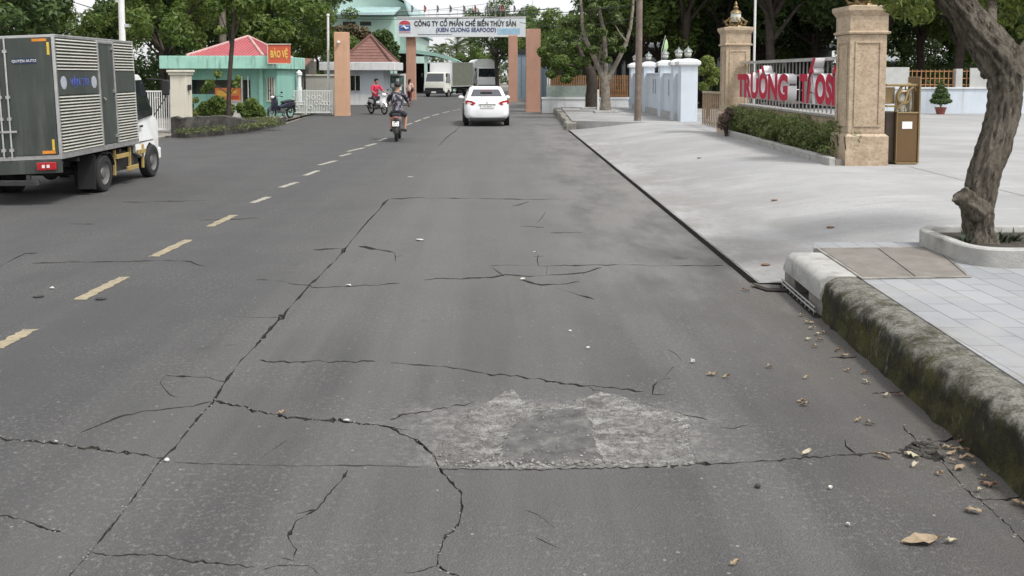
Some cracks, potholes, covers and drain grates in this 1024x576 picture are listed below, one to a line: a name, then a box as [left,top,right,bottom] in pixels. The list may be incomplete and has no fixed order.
crack [941,460,1024,542]
crack [903,424,953,446]
crack [0,375,474,576]
crack [427,267,602,299]
pothole [901,441,945,462]
crack [261,350,746,429]
crack [0,253,202,267]
crack [358,246,402,261]
